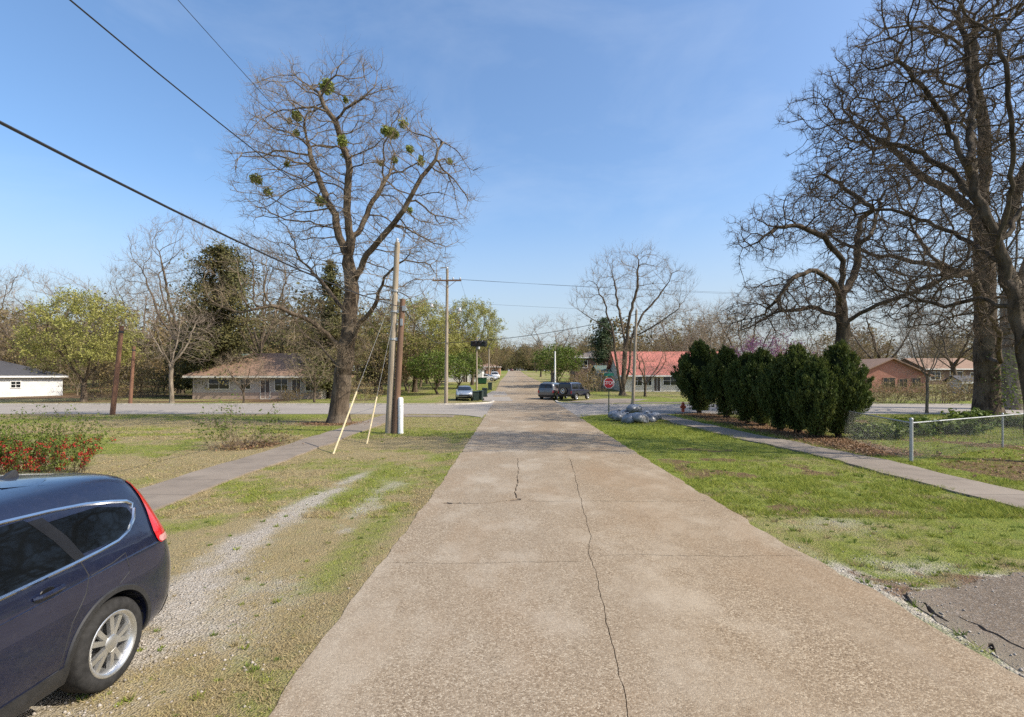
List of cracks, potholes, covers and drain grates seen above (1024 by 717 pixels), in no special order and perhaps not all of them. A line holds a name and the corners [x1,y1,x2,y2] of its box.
crack [570,460,628,717]
crack [925,603,1024,649]
